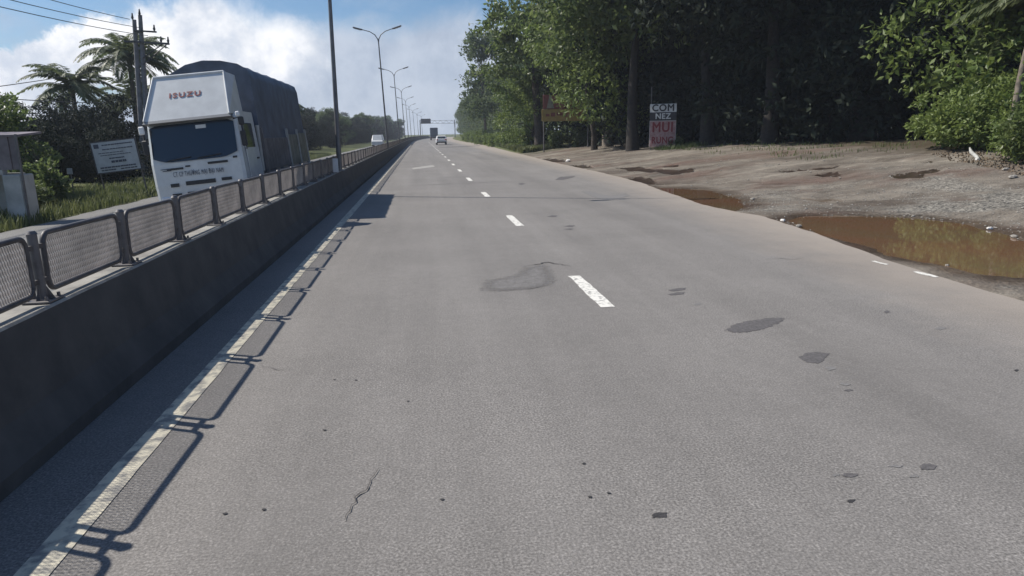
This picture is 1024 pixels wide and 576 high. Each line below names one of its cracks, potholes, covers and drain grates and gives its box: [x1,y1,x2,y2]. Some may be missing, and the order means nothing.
pothole [890,169,940,179]
crack [344,468,379,521]
pothole [620,167,694,175]
